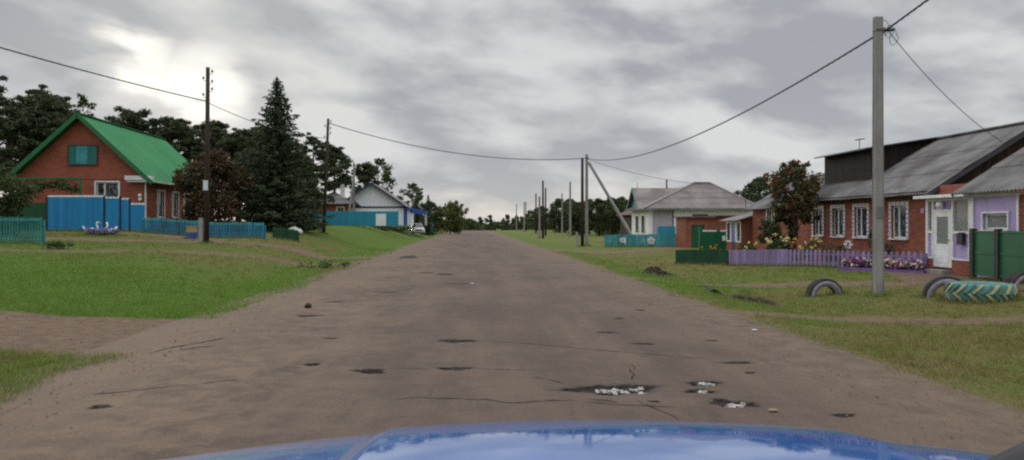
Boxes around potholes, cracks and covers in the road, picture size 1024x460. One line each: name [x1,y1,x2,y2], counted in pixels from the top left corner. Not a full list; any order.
crack [398,377,681,421]
crack [492,341,713,379]
pothole [544,383,670,396]
crack [90,380,235,395]
pothole [703,397,767,408]
